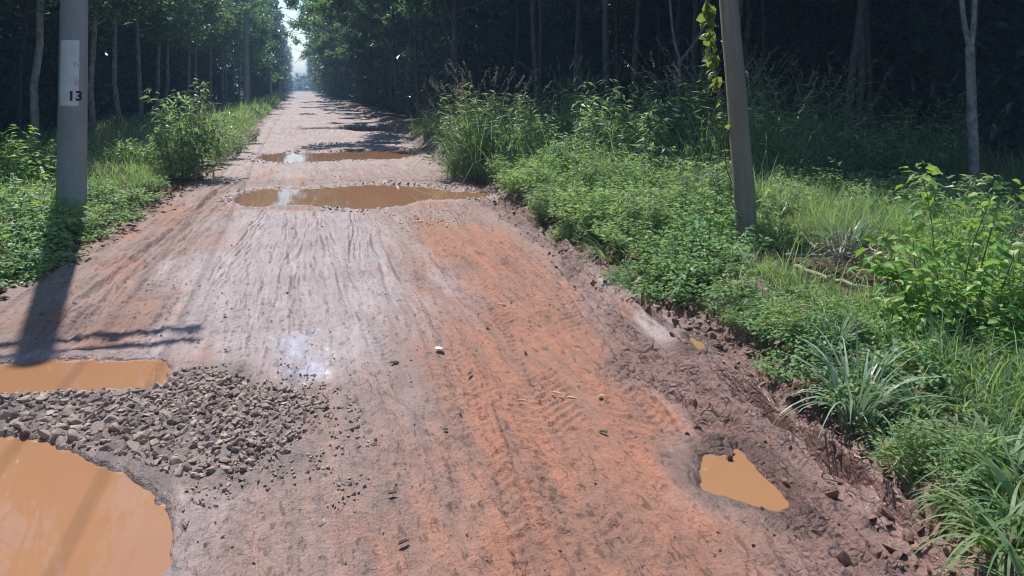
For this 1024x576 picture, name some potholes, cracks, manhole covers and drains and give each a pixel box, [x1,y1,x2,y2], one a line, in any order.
pothole [694,441,800,511]
pothole [0,430,184,576]
pothole [233,183,492,205]
pothole [0,354,173,392]
